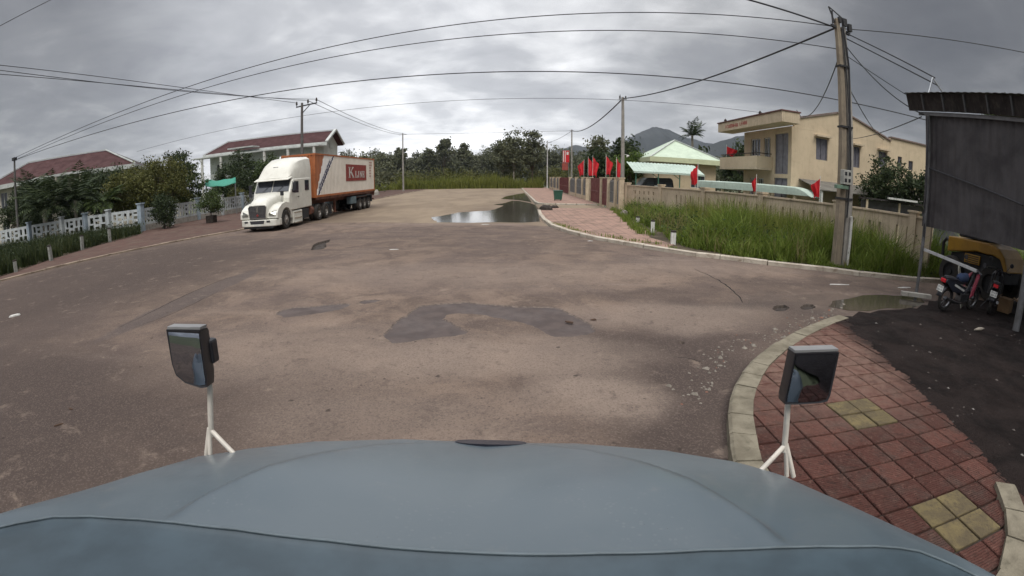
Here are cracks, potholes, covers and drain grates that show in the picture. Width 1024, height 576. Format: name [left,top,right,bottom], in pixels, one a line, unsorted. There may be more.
pothole [311,239,331,250]
